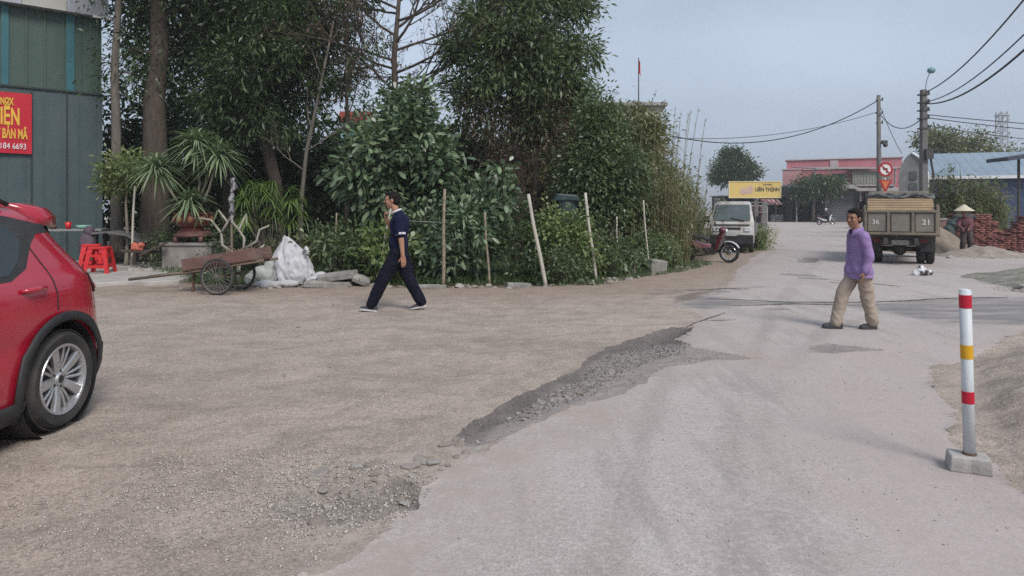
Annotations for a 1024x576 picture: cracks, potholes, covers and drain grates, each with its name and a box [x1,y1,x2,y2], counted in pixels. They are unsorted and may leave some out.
pothole [455,327,751,447]
